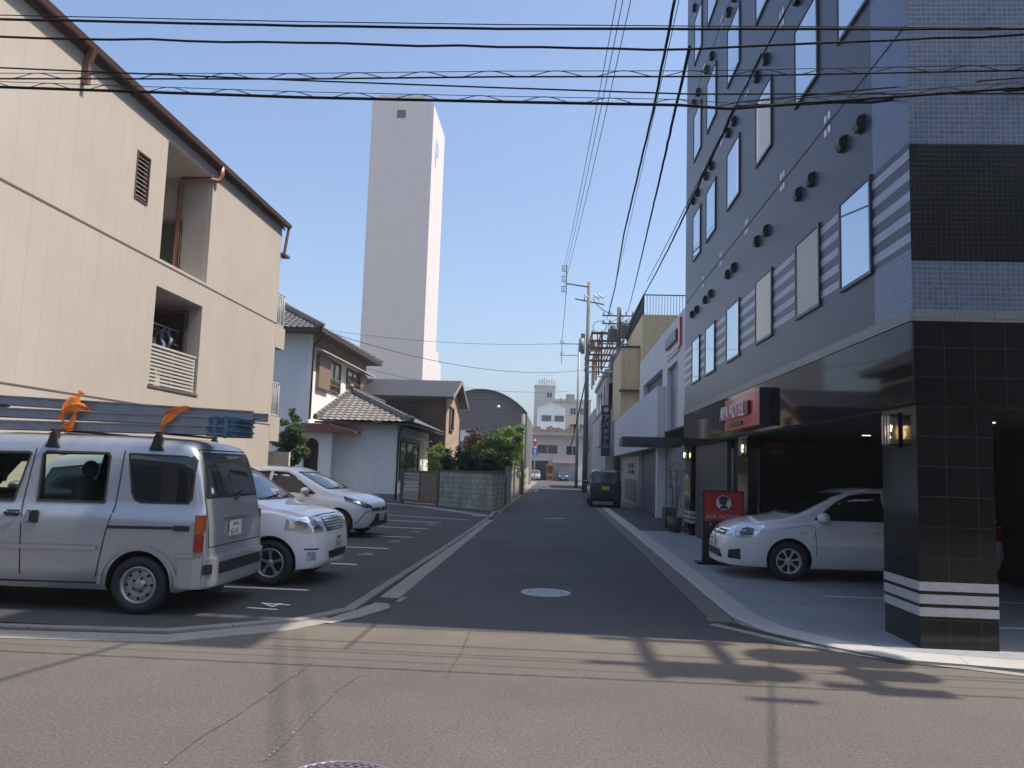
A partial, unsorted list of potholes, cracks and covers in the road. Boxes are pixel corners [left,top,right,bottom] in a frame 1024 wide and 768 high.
manhole cover [295,759,387,768]
crack [262,673,364,762]
crack [161,661,315,768]
manhole cover [521,588,571,597]
